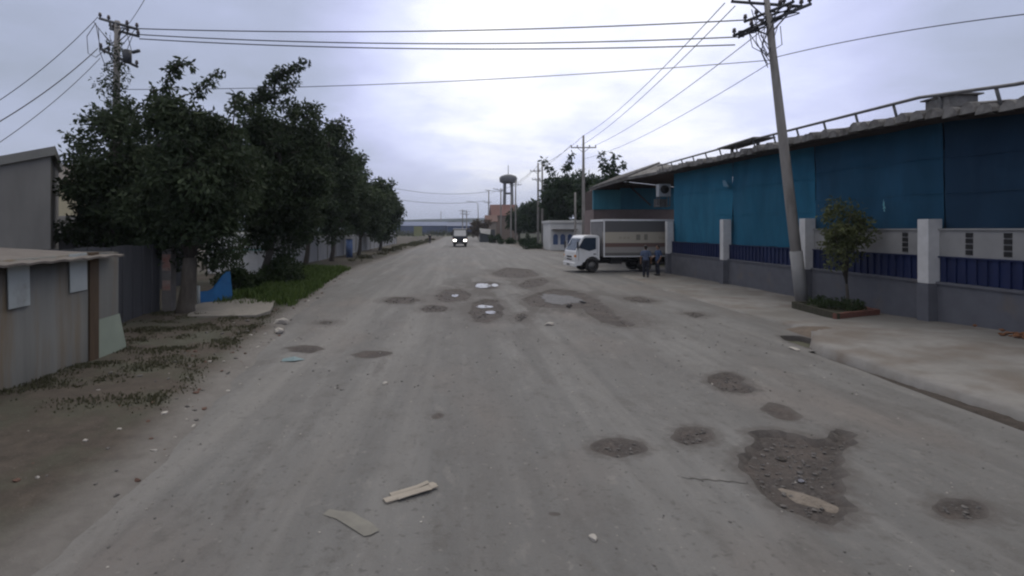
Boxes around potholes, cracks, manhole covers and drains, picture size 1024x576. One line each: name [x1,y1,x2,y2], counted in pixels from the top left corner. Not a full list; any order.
pothole [467,299,505,323]
pothole [351,350,393,358]
pothole [670,426,716,446]
pothole [491,268,539,278]
pothole [932,498,990,521]
pothole [736,428,859,529]
pothole [520,289,636,327]
pothole [760,402,803,421]
pothole [707,372,757,393]
pothole [284,345,325,354]
pothole [517,278,550,288]
pothole [434,289,472,302]
